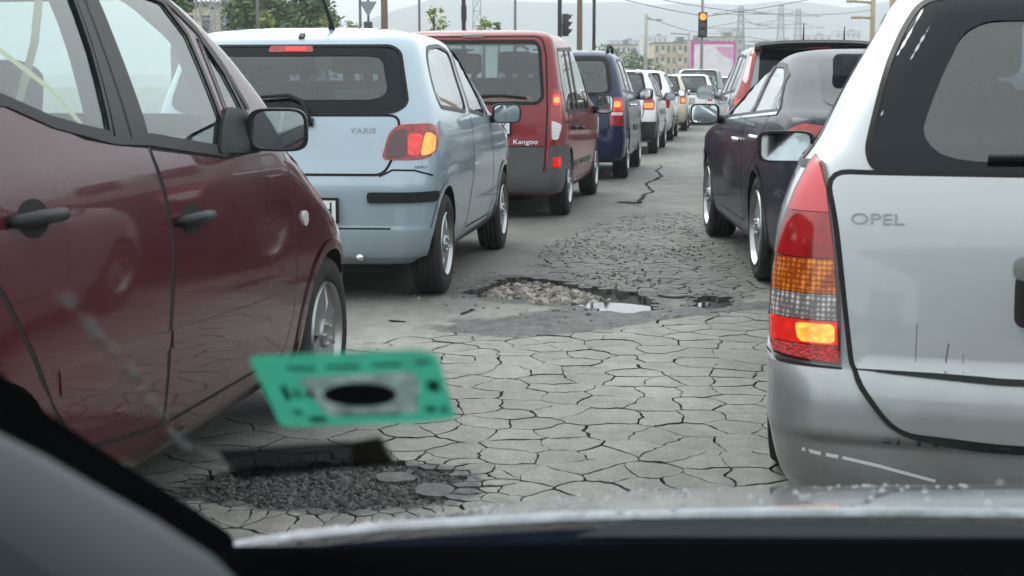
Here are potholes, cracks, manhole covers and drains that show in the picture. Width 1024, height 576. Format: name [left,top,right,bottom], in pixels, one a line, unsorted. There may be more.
pothole [406,270,735,324]
pothole [186,466,466,516]
crack [614,165,663,204]
crack [547,231,749,301]
